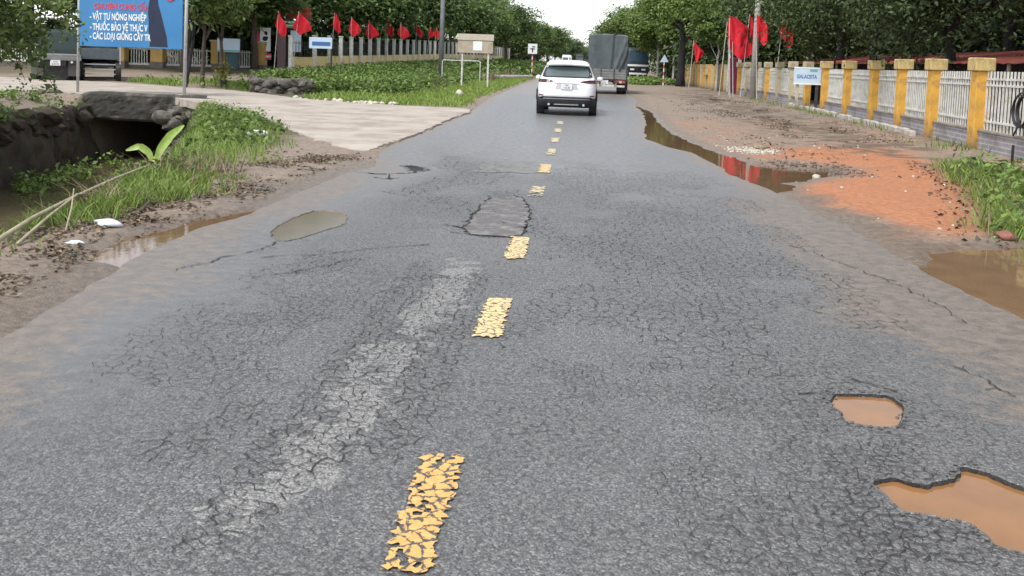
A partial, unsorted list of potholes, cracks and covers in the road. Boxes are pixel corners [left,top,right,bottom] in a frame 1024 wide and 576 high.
pothole [868,459,1024,555]
pothole [818,386,914,432]
pothole [270,210,348,241]
crack [171,261,490,554]
crack [80,242,422,503]
crack [791,245,1015,396]
